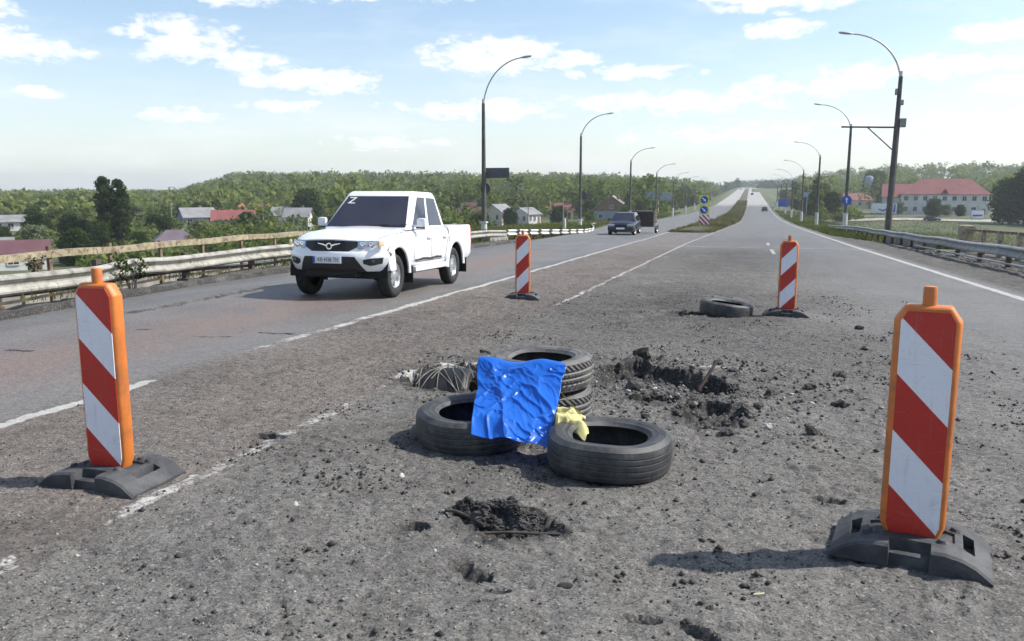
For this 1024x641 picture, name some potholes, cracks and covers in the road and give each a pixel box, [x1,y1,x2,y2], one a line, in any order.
pothole [625,393,676,405]
pothole [400,363,478,392]
pothole [447,563,475,582]
pothole [593,357,739,396]
pothole [451,507,569,542]
pothole [672,401,749,426]
pothole [458,568,495,584]
